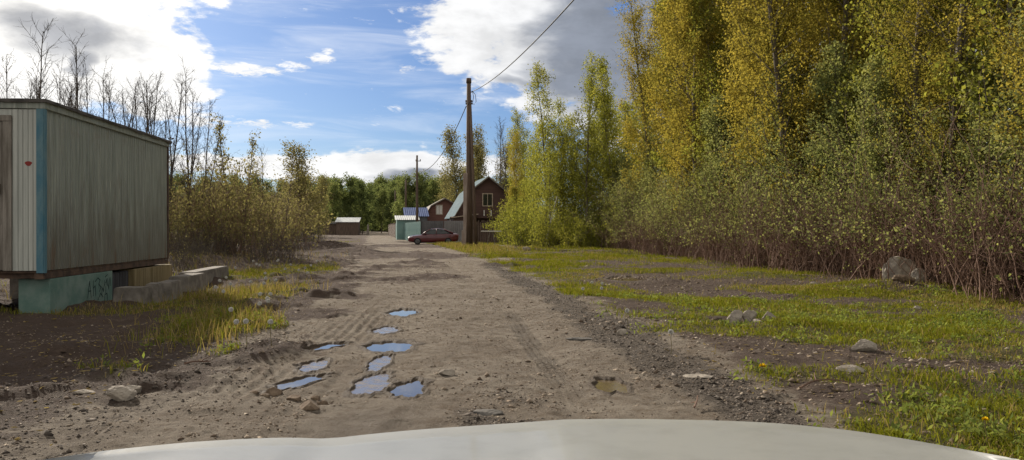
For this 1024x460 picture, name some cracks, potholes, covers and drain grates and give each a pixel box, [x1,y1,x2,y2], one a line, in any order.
pothole [362,350,396,376]
pothole [365,324,404,336]
pothole [355,338,426,356]
pothole [383,375,435,400]
pothole [341,369,399,399]
pothole [298,341,353,352]
pothole [381,307,423,318]
pothole [256,371,335,396]
pothole [587,375,635,396]
pothole [292,357,333,375]
